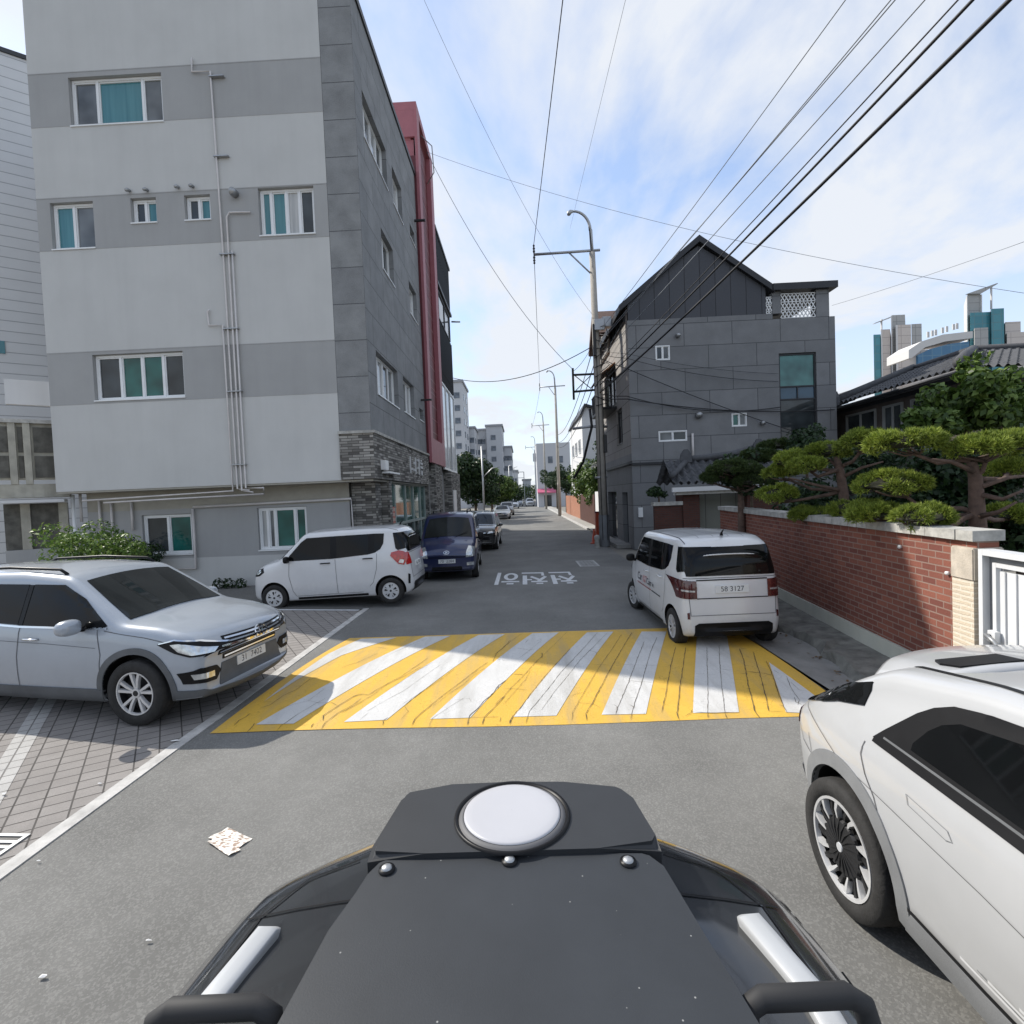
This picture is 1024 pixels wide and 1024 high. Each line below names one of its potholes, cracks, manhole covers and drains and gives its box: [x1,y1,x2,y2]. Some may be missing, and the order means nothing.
drain grate [0,833,31,856]
